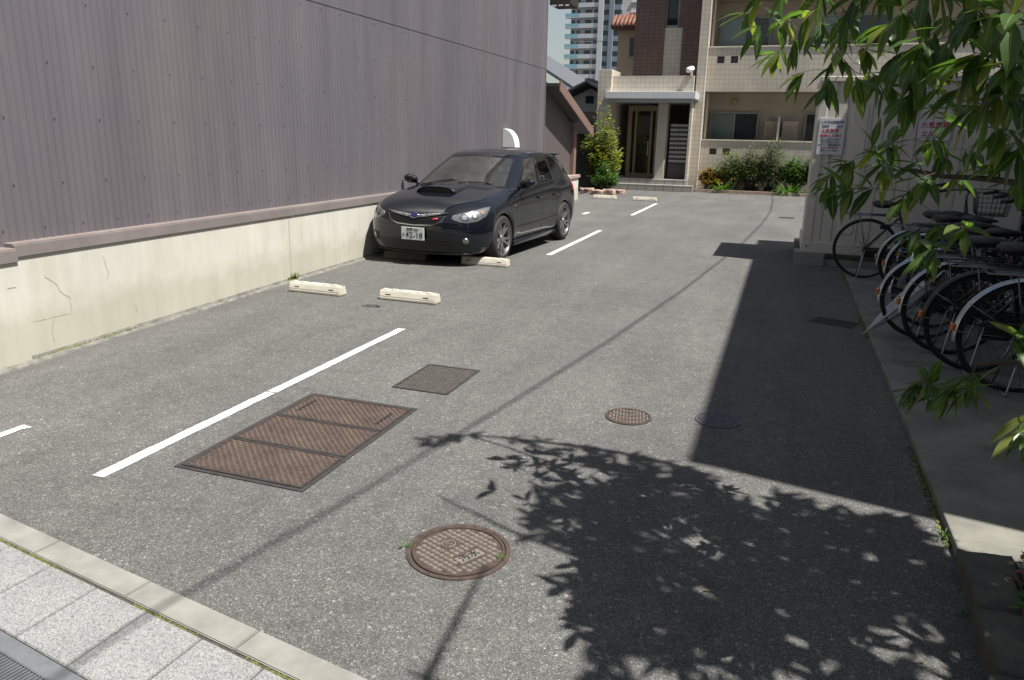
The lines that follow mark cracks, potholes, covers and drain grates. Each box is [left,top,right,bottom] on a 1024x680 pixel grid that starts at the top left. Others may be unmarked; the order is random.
manhole cover [406,524,511,581]
manhole cover [605,408,652,426]
drain grate [809,316,861,329]
drain grate [392,364,480,395]
manhole cover [174,393,418,493]
manhole cover [695,412,741,429]
